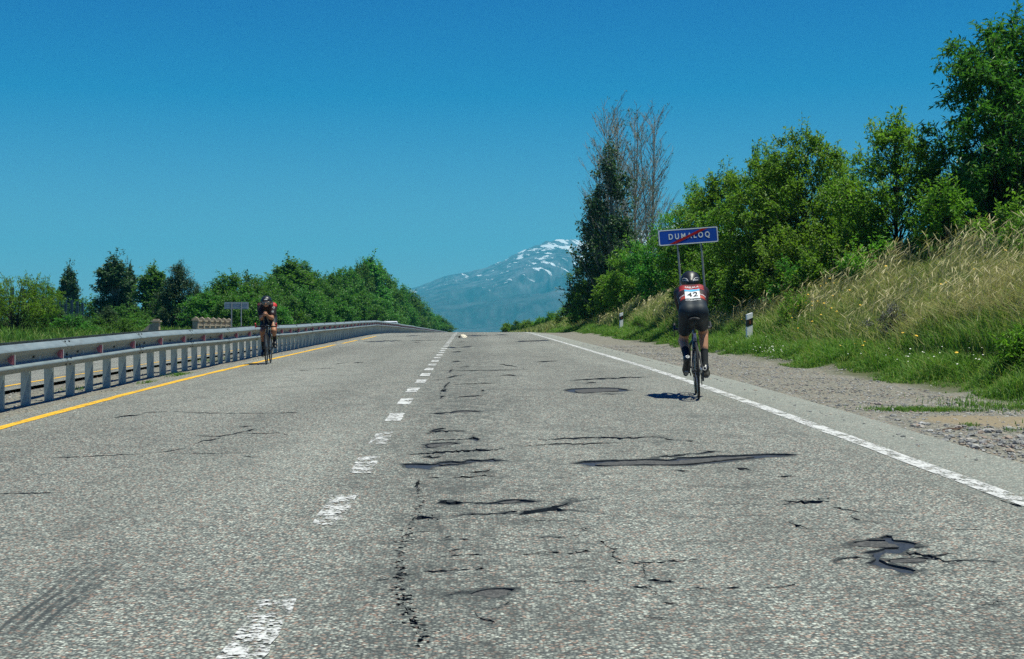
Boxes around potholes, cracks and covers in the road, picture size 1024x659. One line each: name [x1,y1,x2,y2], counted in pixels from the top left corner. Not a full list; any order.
crack [780,498,870,529]
crack [523,519,697,618]
crack [55,411,297,458]
crack [409,428,500,478]
crack [528,436,692,446]
crack [440,334,549,399]
crack [572,377,641,395]
